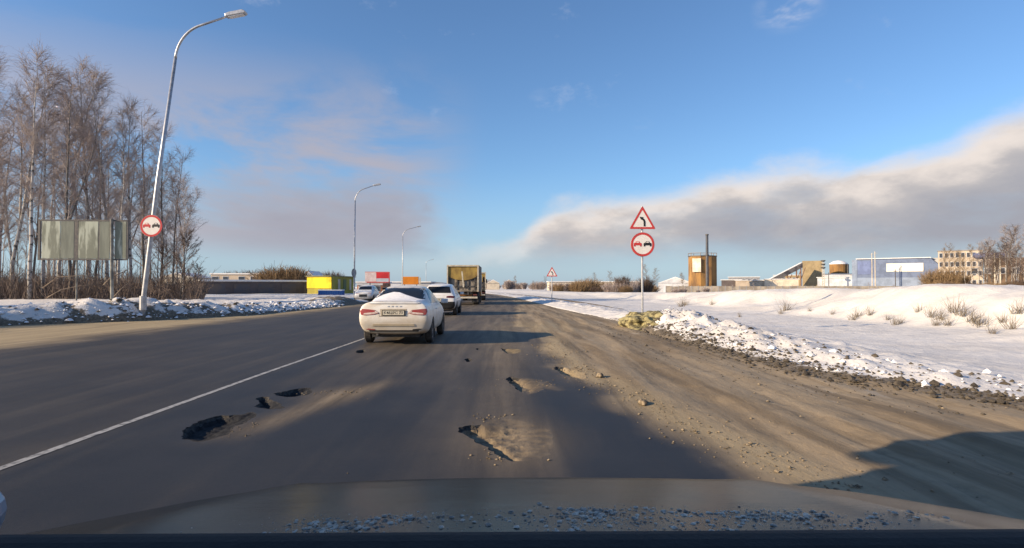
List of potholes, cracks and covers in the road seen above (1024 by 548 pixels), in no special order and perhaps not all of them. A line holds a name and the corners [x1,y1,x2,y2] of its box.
pothole [274,387,312,397]
pothole [506,377,544,394]
pothole [254,397,285,409]
pothole [458,418,554,461]
pothole [181,412,257,442]
pothole [554,366,589,380]
